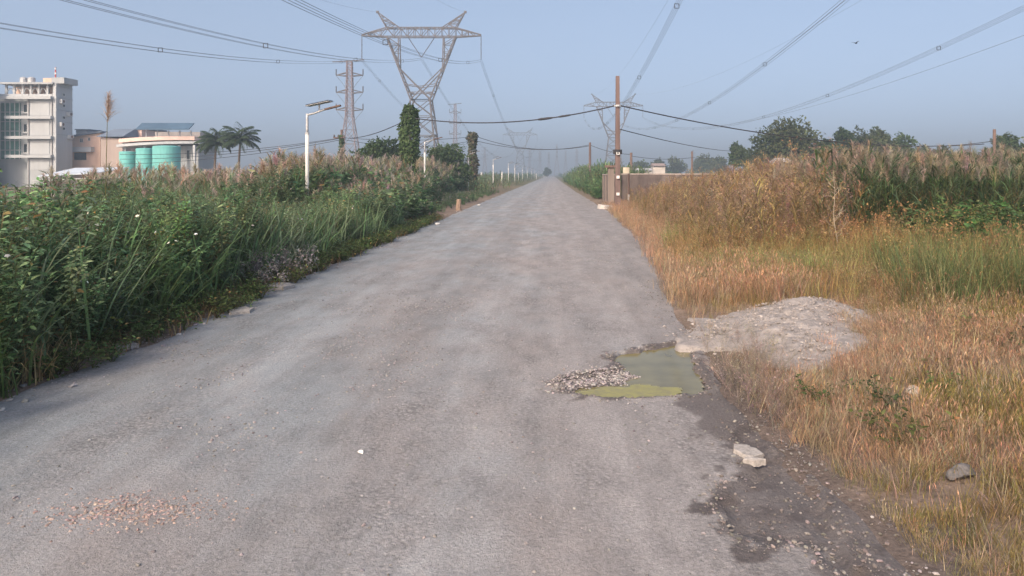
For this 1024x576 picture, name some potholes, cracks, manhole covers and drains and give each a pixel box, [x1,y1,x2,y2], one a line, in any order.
pothole [540,341,714,402]
